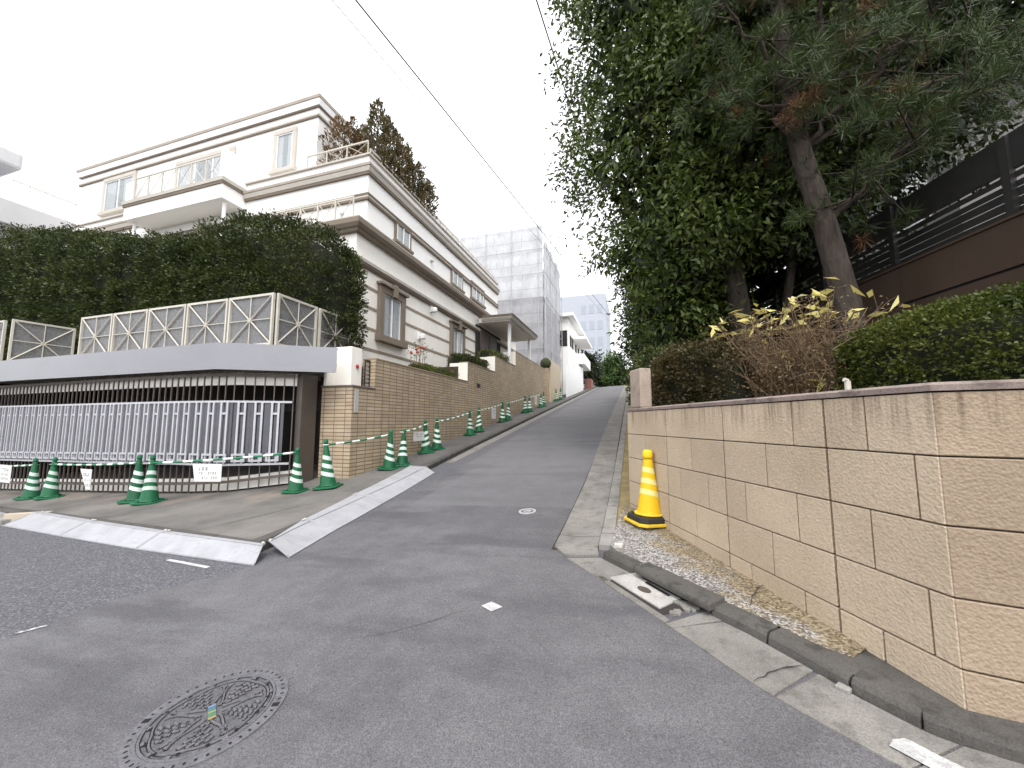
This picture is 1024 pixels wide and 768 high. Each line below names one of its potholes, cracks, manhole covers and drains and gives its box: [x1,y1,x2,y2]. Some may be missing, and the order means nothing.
crack [754,664,805,681]
manhole cover [117,668,288,768]
